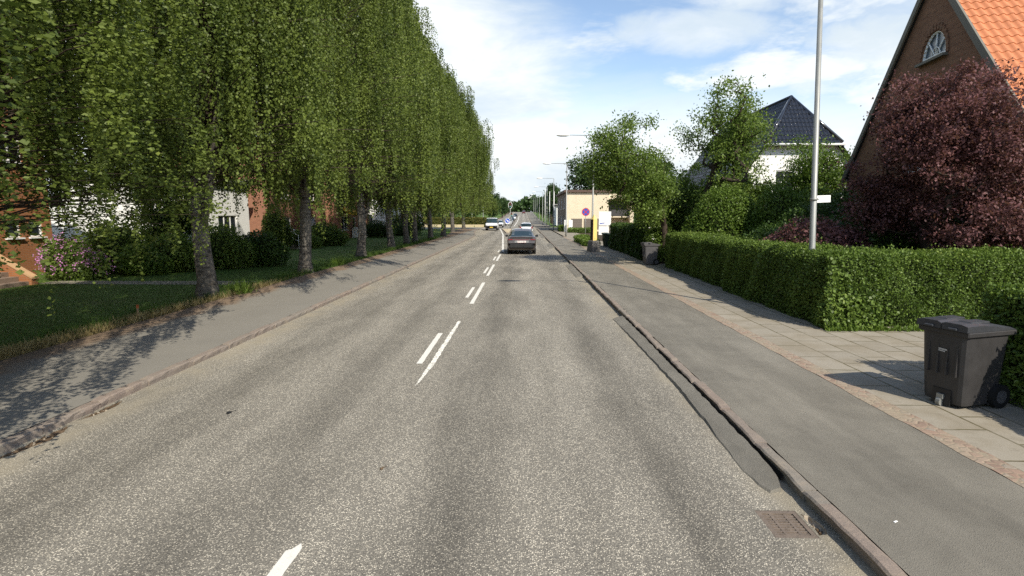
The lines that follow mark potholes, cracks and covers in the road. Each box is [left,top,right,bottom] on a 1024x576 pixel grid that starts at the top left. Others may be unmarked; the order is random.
drain grate [755,511,819,538]
